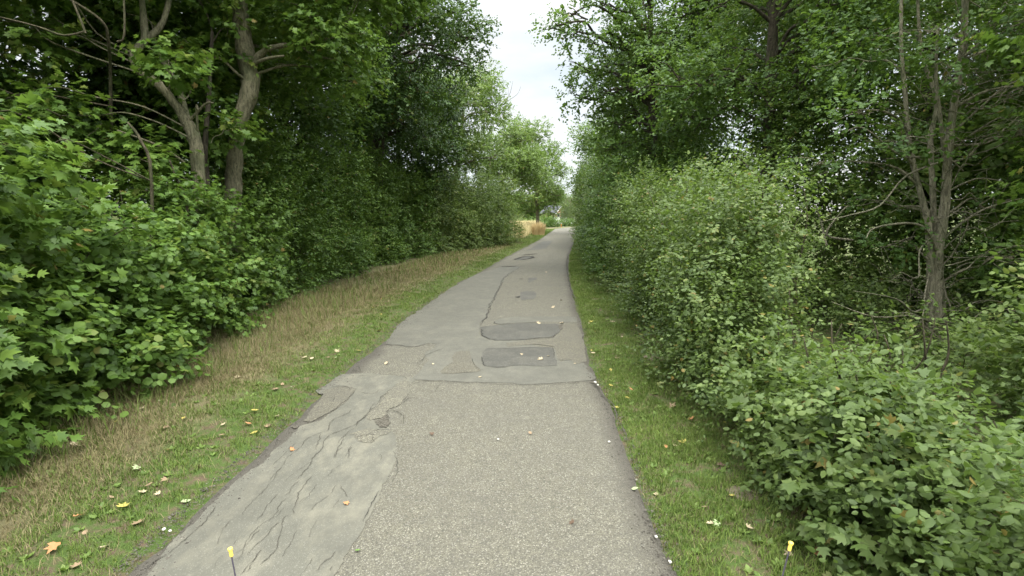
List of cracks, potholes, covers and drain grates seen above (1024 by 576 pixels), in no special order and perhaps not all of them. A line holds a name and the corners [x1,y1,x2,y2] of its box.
pothole [375,415,390,427]
crack [142,366,439,574]
